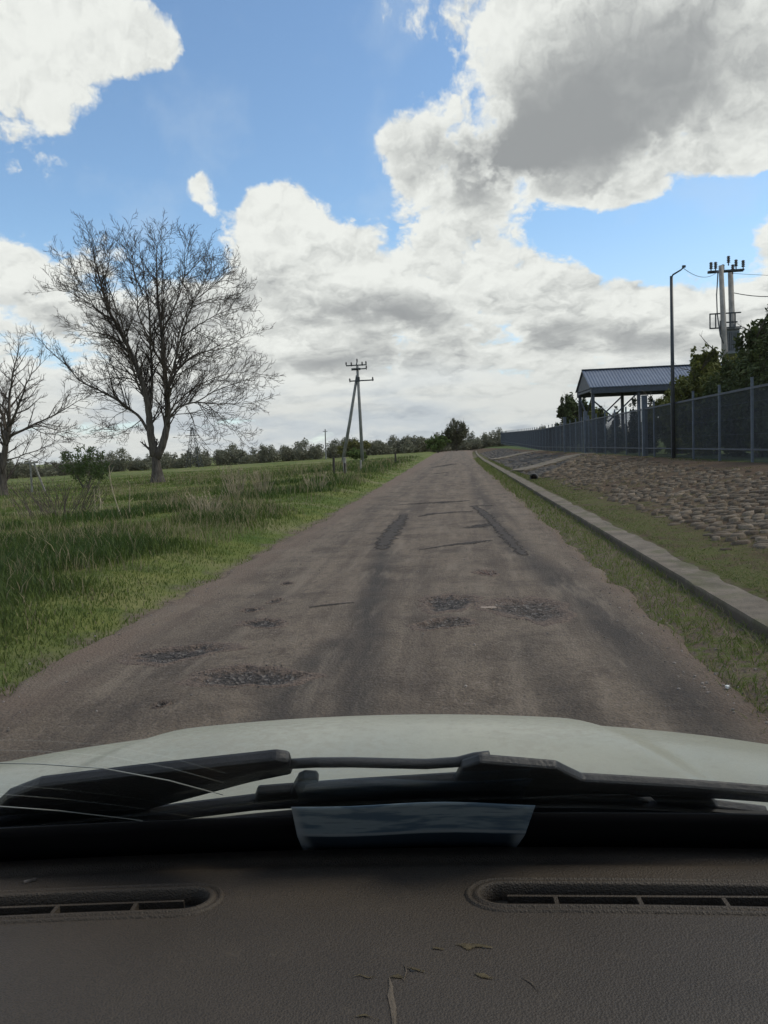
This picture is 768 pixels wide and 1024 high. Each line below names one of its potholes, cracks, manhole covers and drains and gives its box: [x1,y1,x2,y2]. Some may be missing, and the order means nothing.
pothole [175,664,328,688]
pothole [416,593,485,615]
pothole [151,700,172,709]
pothole [406,615,480,631]
pothole [234,618,289,629]
pothole [471,569,500,577]
pothole [471,595,578,627]
pothole [116,642,248,667]
